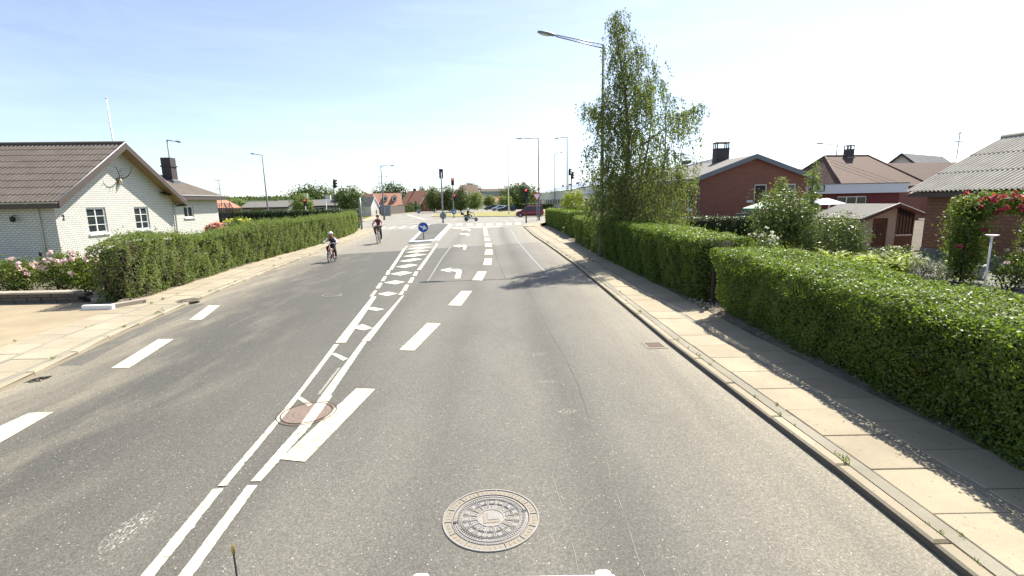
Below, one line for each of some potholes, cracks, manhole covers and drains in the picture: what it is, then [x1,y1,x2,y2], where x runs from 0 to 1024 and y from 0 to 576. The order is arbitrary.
manhole cover [442,489,540,553]
manhole cover [275,401,337,426]
